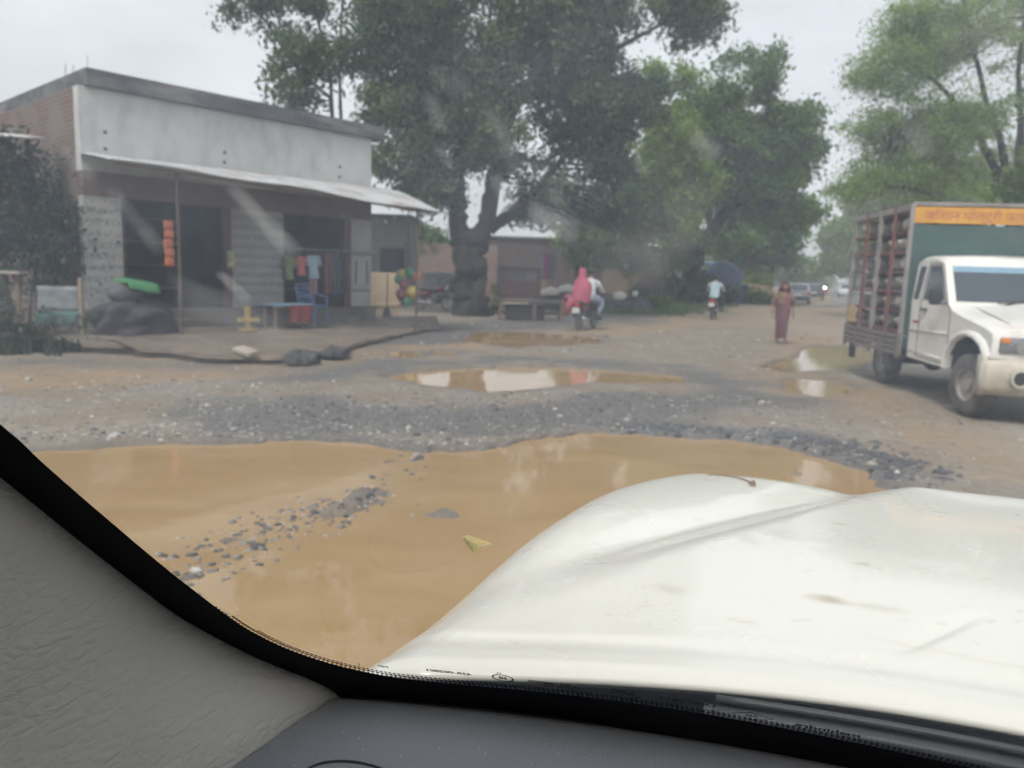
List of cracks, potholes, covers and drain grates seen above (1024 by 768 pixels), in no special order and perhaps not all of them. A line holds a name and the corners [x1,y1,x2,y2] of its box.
pothole [456,330,614,348]
pothole [775,377,867,398]
pothole [28,427,912,671]
pothole [366,362,697,394]
pothole [758,344,874,373]
